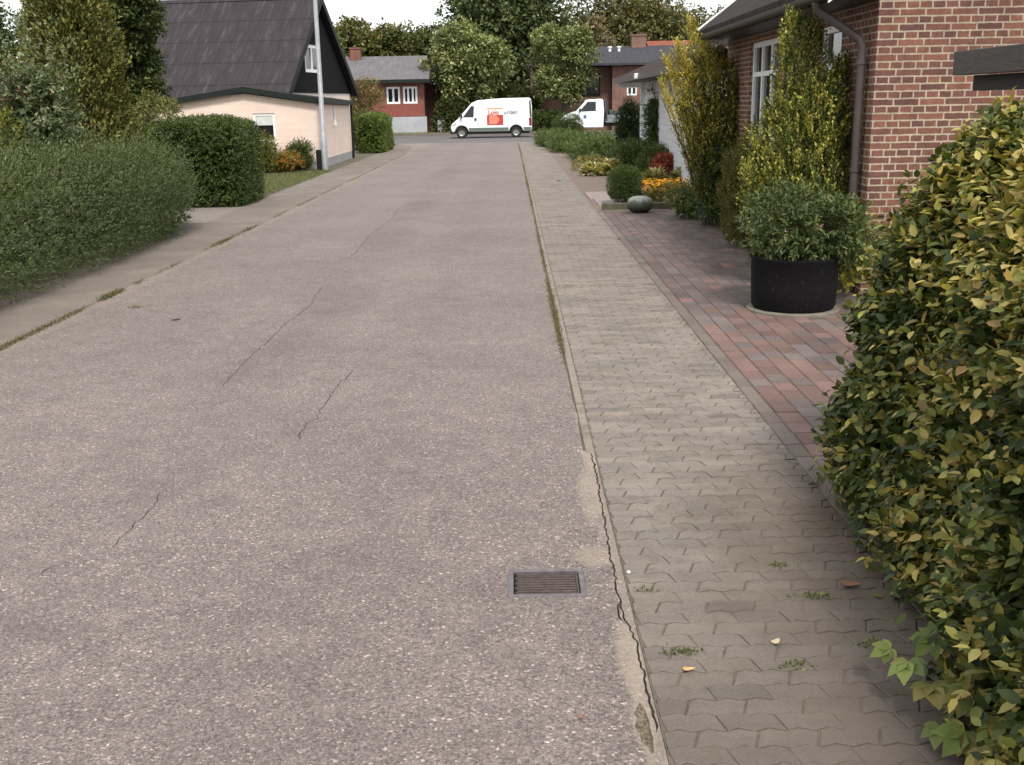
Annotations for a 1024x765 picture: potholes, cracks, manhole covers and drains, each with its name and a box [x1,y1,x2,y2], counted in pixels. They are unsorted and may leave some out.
crack [113,493,160,547]
crack [223,284,329,386]
pothole [634,702,654,754]
crack [591,453,659,732]
drain grate [508,568,587,598]
crack [297,370,353,442]
